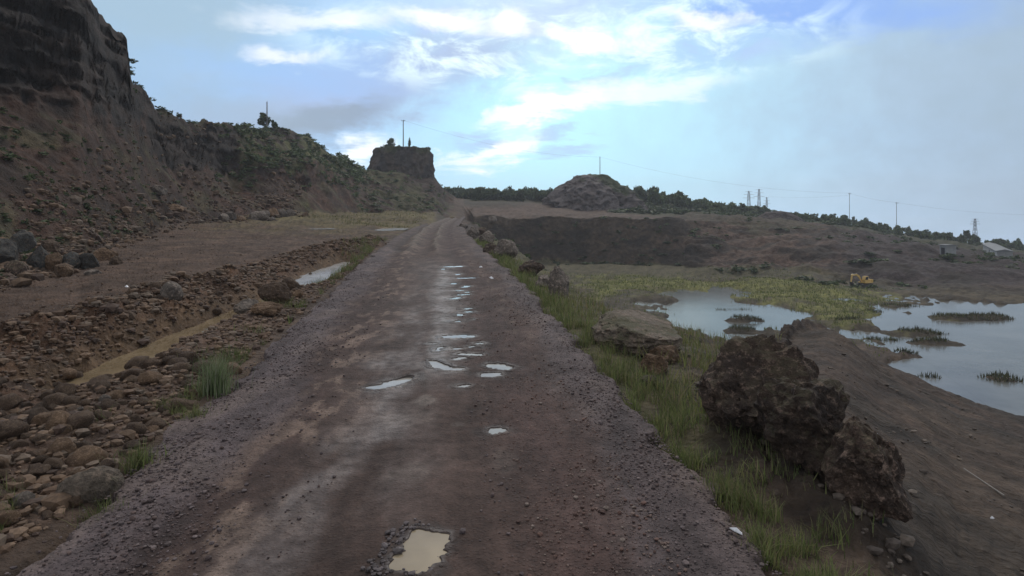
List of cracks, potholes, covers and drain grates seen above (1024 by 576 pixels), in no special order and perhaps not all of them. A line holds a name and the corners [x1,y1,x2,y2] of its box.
pothole [429,345,453,353]
pothole [424,359,473,372]
pothole [479,425,516,438]
pothole [380,524,459,576]
